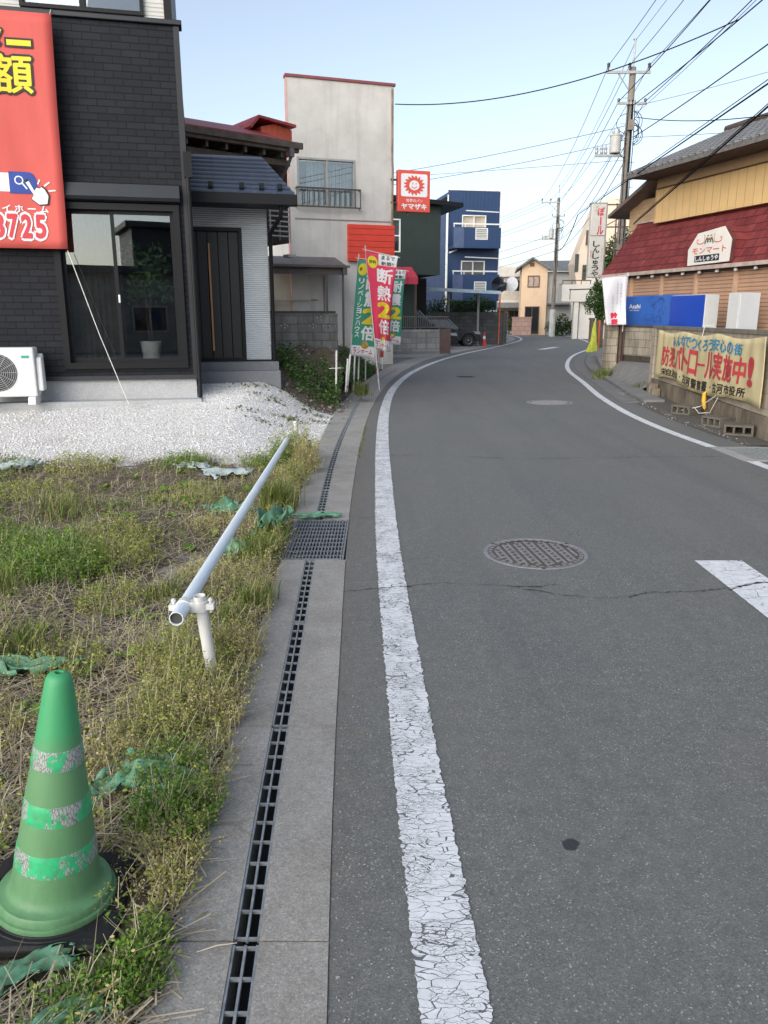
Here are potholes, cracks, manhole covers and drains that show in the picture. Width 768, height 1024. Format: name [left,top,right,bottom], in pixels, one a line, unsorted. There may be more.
drain grate [281,520,349,583]
drain grate [219,945,259,1024]
drain grate [322,468,334,490]
drain grate [272,622,305,729]
drain grate [315,490,329,520]
drain grate [234,728,289,944]
manhole cover [483,538,589,570]
drain grate [293,560,315,623]
crack [349,582,768,598]
